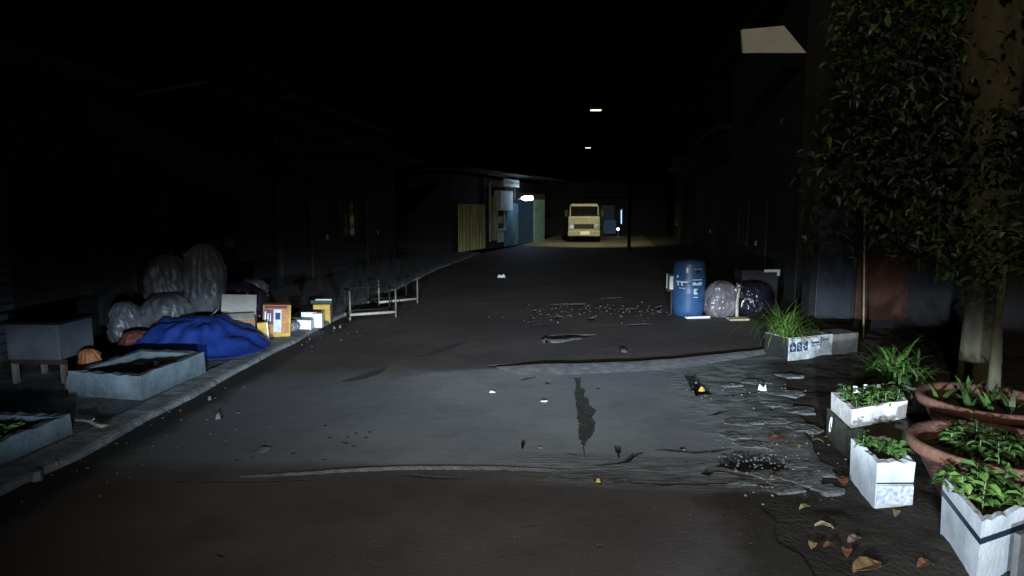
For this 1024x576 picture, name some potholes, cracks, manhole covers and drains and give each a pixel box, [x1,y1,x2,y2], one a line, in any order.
pothole [541,334,595,343]
crack [552,446,770,482]
pothole [682,371,712,396]
pothole [716,450,792,473]
crack [486,348,797,430]
